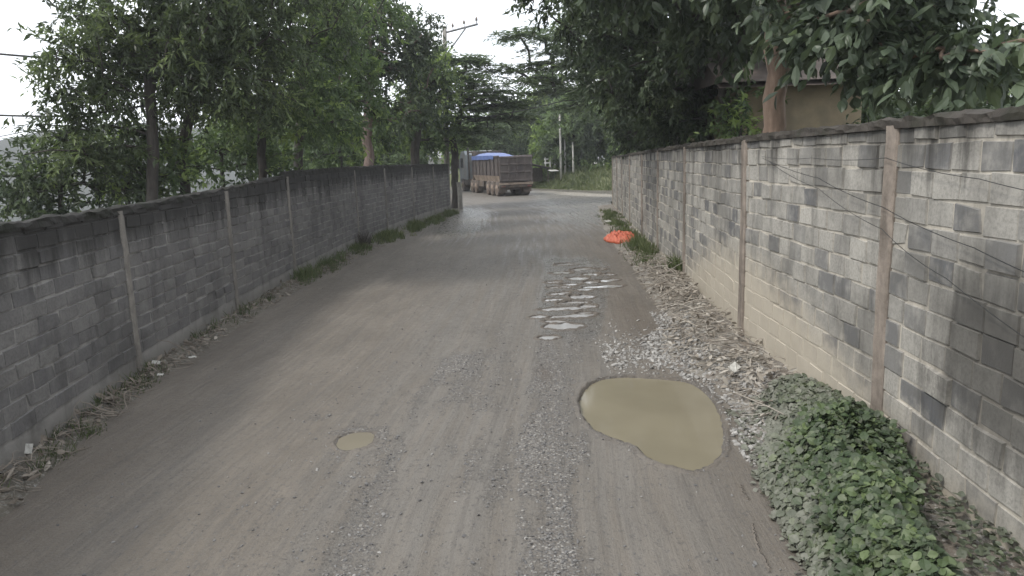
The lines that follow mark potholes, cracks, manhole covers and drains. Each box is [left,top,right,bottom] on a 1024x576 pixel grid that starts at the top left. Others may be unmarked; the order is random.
pothole [572,374,733,475]
pothole [544,312,600,321]
pothole [540,322,588,331]
pothole [328,430,381,453]
crack [739,484,773,572]
